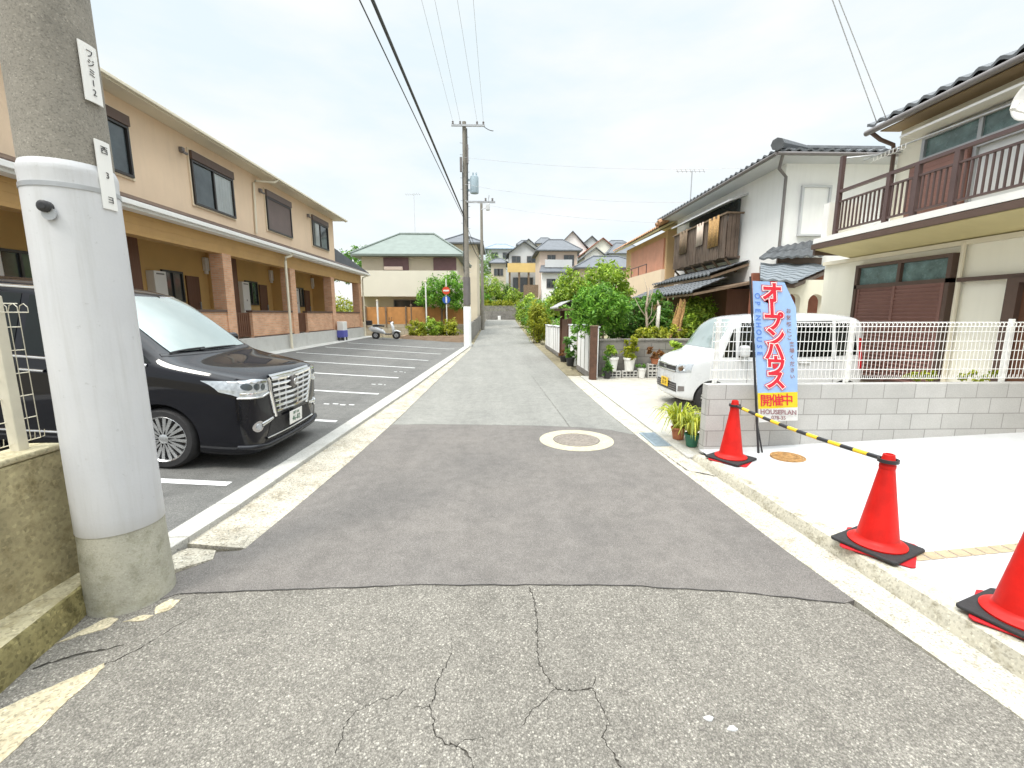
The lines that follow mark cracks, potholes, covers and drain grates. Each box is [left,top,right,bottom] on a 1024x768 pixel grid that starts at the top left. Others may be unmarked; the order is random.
manhole cover [540,430,614,451]
drain grate [639,432,671,447]
crack [334,638,486,768]
crack [32,613,202,670]
manhole cover [770,451,806,463]
crack [521,587,622,768]
